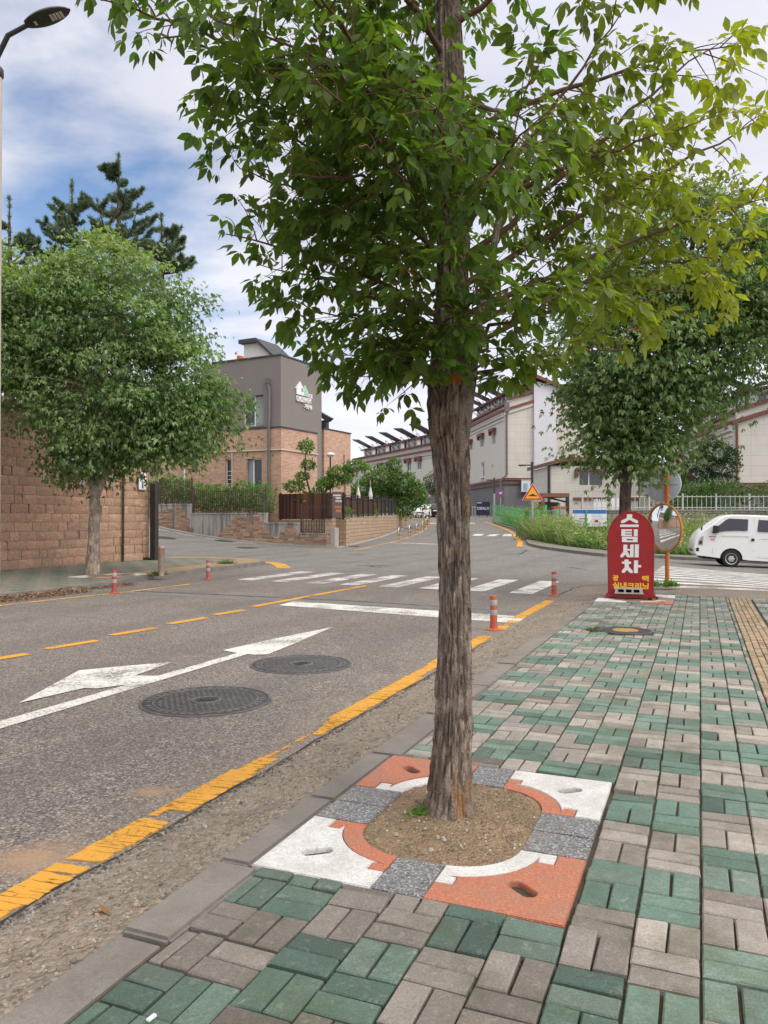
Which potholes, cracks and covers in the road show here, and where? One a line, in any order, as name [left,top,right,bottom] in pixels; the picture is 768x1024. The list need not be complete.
manhole cover [250,655,352,675]
manhole cover [599,626,652,636]
manhole cover [138,686,271,718]
